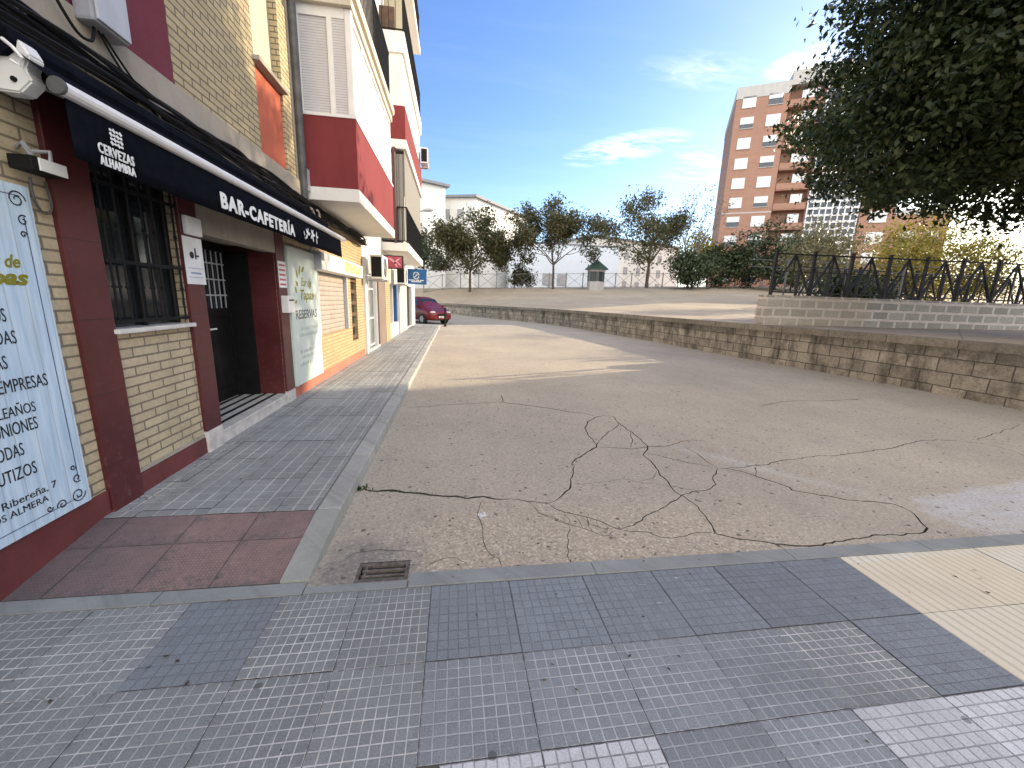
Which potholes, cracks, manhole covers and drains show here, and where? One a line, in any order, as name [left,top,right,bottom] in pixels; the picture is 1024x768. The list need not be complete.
crack [361,396,1022,567]
drain grate [354,560,411,583]
